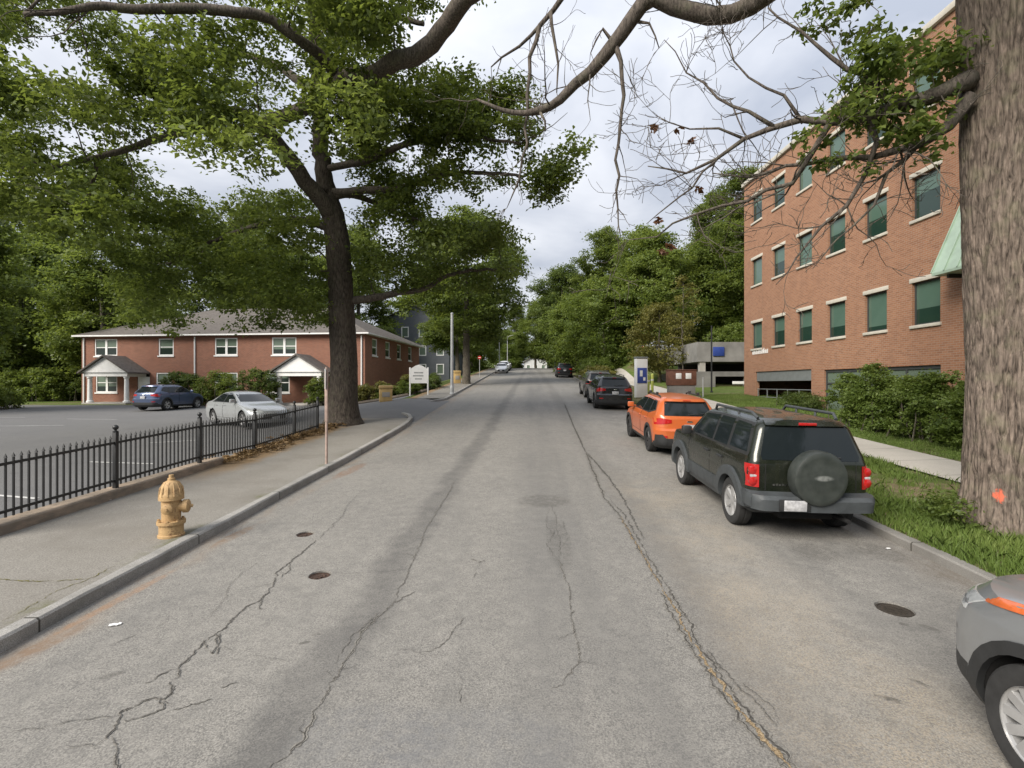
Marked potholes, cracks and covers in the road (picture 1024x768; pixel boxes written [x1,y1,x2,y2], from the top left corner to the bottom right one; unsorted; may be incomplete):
crack [269,482,466,768]
crack [565,405,796,768]
manhole cover [875,603,914,618]
crack [546,505,605,691]
crack [16,489,365,768]
manhole cover [309,572,331,580]
